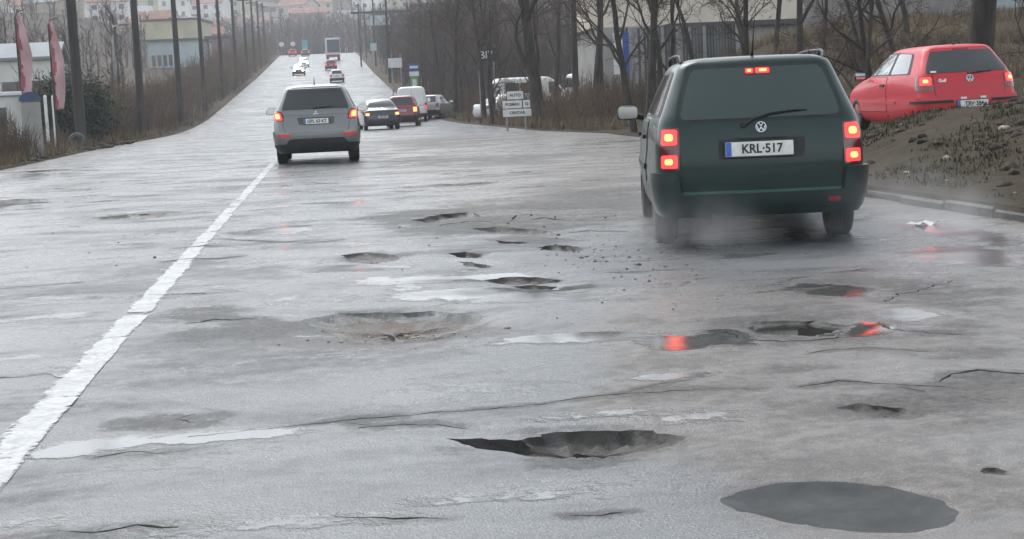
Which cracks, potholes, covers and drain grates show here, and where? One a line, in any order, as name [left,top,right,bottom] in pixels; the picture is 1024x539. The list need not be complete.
crack [798,369,1024,392]
pothole [300,311,486,345]
pothole [836,403,926,420]
pothole [747,320,859,337]
pothole [445,430,696,461]
crack [94,379,745,458]
pothole [456,261,493,269]
pothole [981,467,1009,475]
pothole [341,252,402,264]
pothole [486,277,568,286]
pothole [473,226,557,235]
pothole [410,212,482,223]
